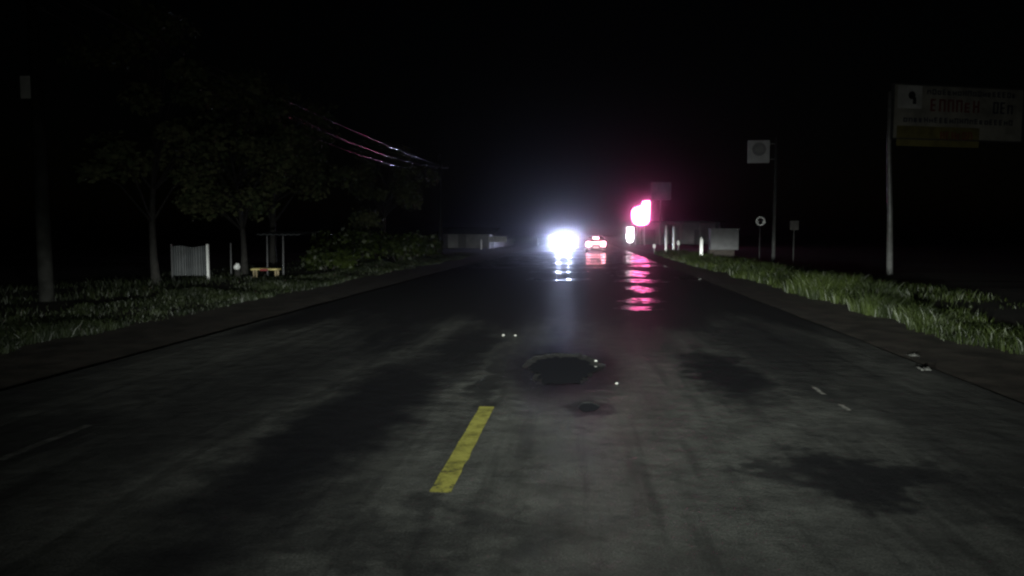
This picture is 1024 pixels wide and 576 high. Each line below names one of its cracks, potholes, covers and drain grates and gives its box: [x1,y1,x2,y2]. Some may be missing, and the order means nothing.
pothole [578,402,600,412]
pothole [522,353,605,386]
